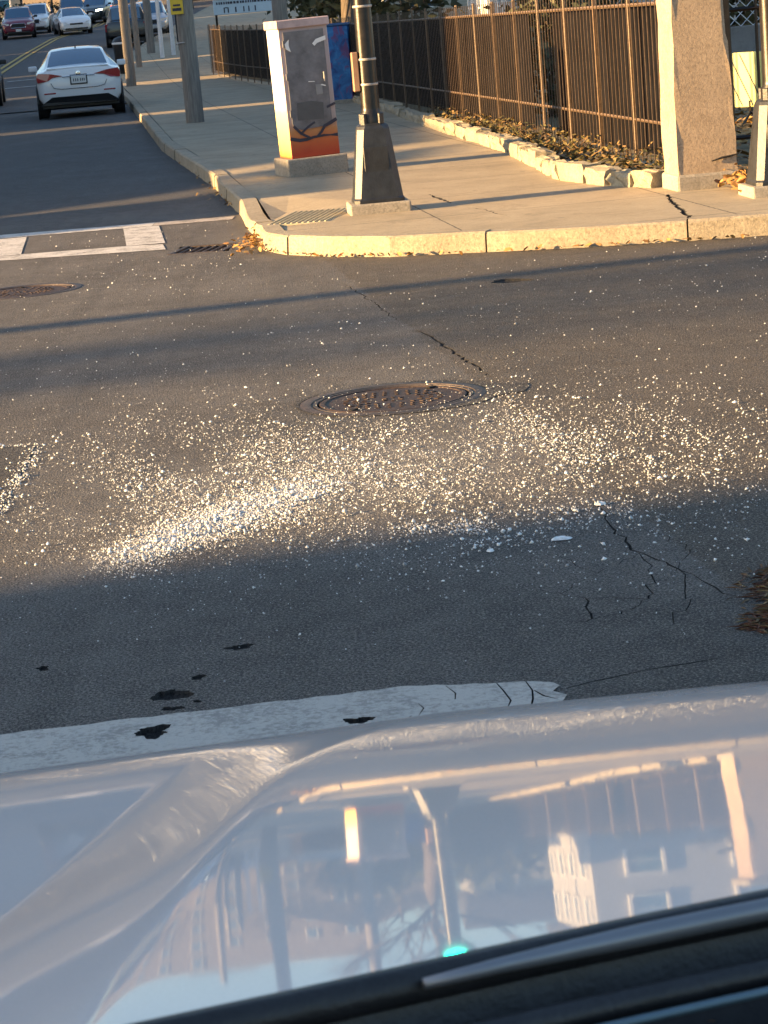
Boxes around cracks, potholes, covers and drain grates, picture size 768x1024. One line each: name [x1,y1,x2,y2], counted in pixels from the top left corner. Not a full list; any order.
drain grate [168,242,239,255]
crack [342,283,561,453]
crack [665,195,692,221]
crack [446,657,722,706]
crack [536,501,741,625]
manhole cover [299,381,487,415]
manhole cover [0,283,83,300]
